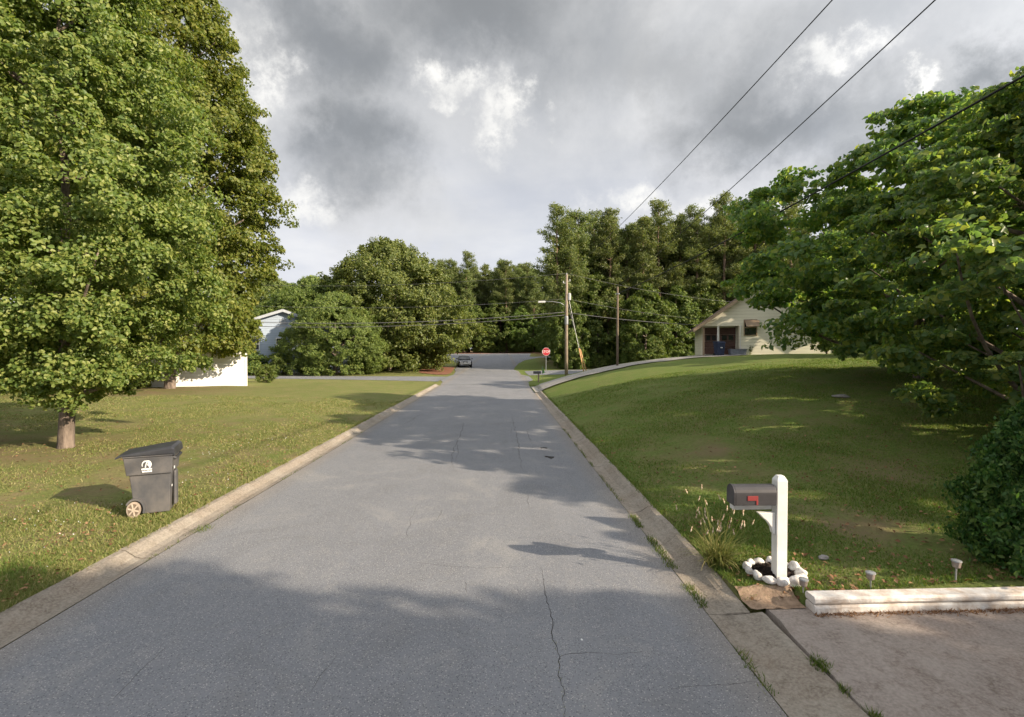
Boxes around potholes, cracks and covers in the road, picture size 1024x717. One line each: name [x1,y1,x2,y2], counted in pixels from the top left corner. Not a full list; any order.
crack [542,571,637,713]
